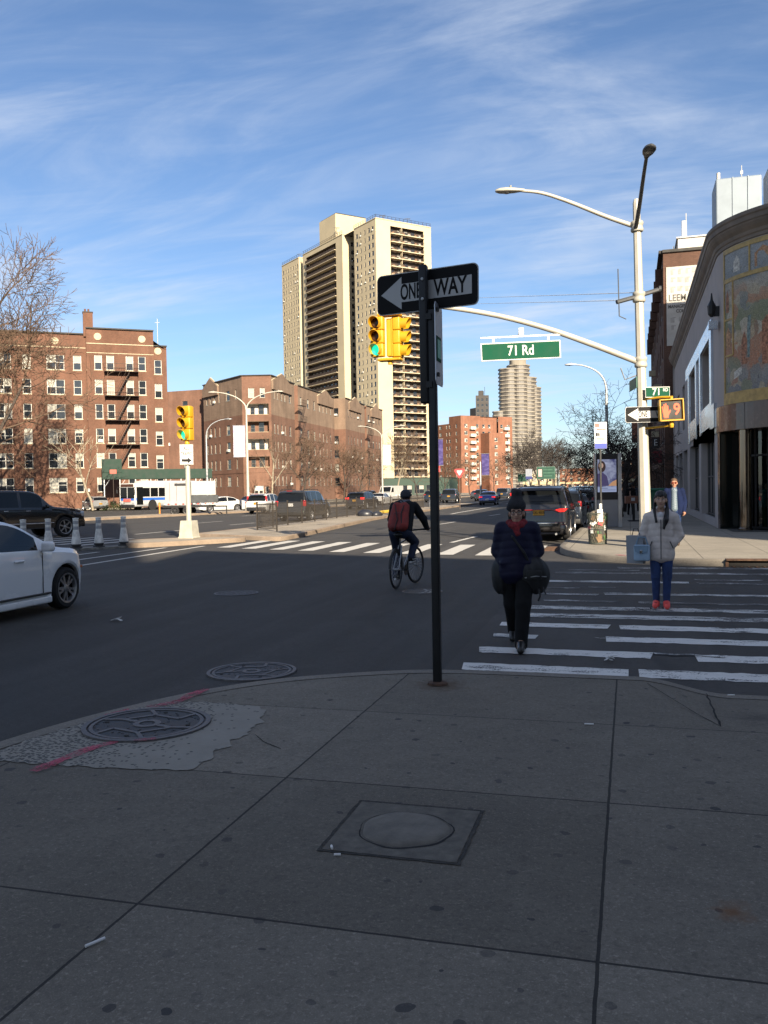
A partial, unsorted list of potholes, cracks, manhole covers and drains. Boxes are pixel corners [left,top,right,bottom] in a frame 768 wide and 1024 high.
manhole cover [206,662,296,682]
utility cover [316,800,485,865]
crack [647,683,721,726]
manhole cover [81,707,211,743]
